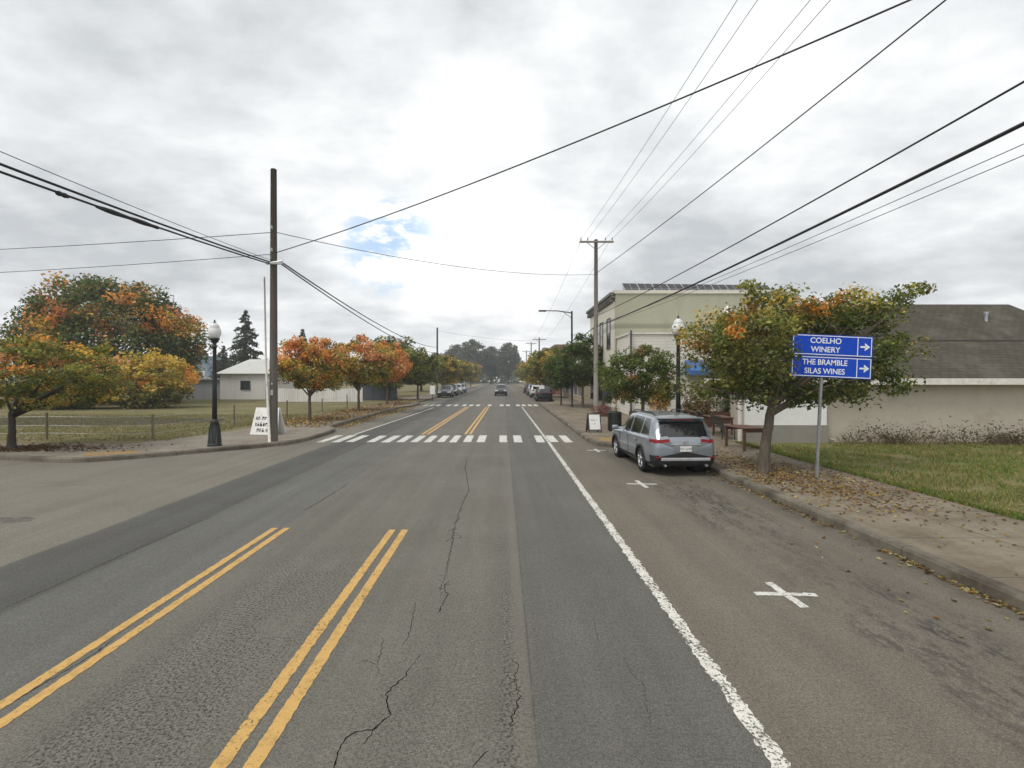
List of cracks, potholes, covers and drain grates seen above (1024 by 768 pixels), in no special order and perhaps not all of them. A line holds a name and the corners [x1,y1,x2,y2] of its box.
crack [436,459,469,614]
crack [333,604,421,768]
